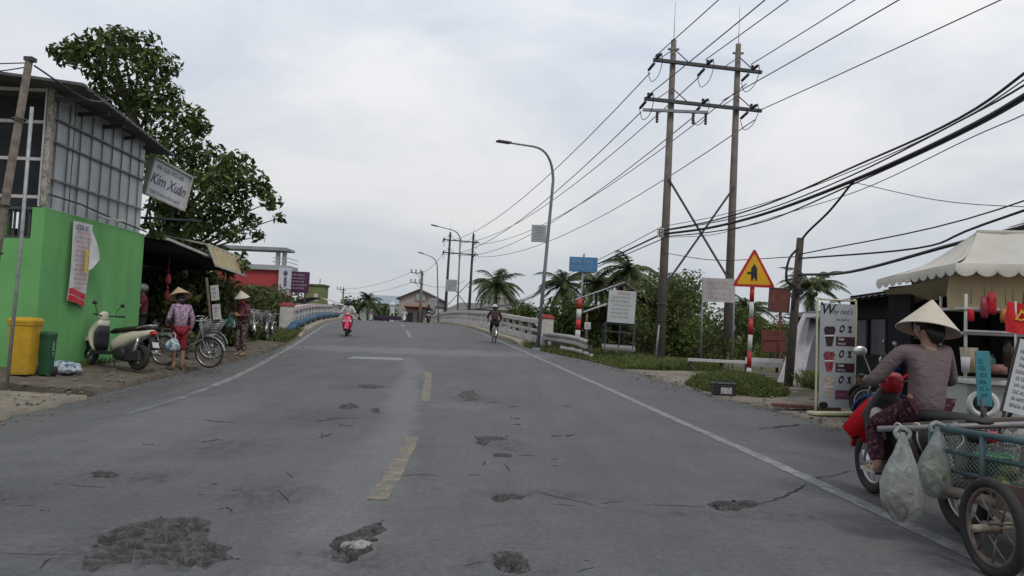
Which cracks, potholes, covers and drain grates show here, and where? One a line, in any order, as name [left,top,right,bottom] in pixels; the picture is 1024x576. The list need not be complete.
pothole [456,390,481,402]
crack [538,471,852,507]
pothole [329,519,387,564]
pothole [490,494,525,503]
pothole [82,516,239,572]
pothole [89,470,121,478]
pothole [474,435,507,445]
pothole [707,499,761,511]
pothole [490,551,531,574]
